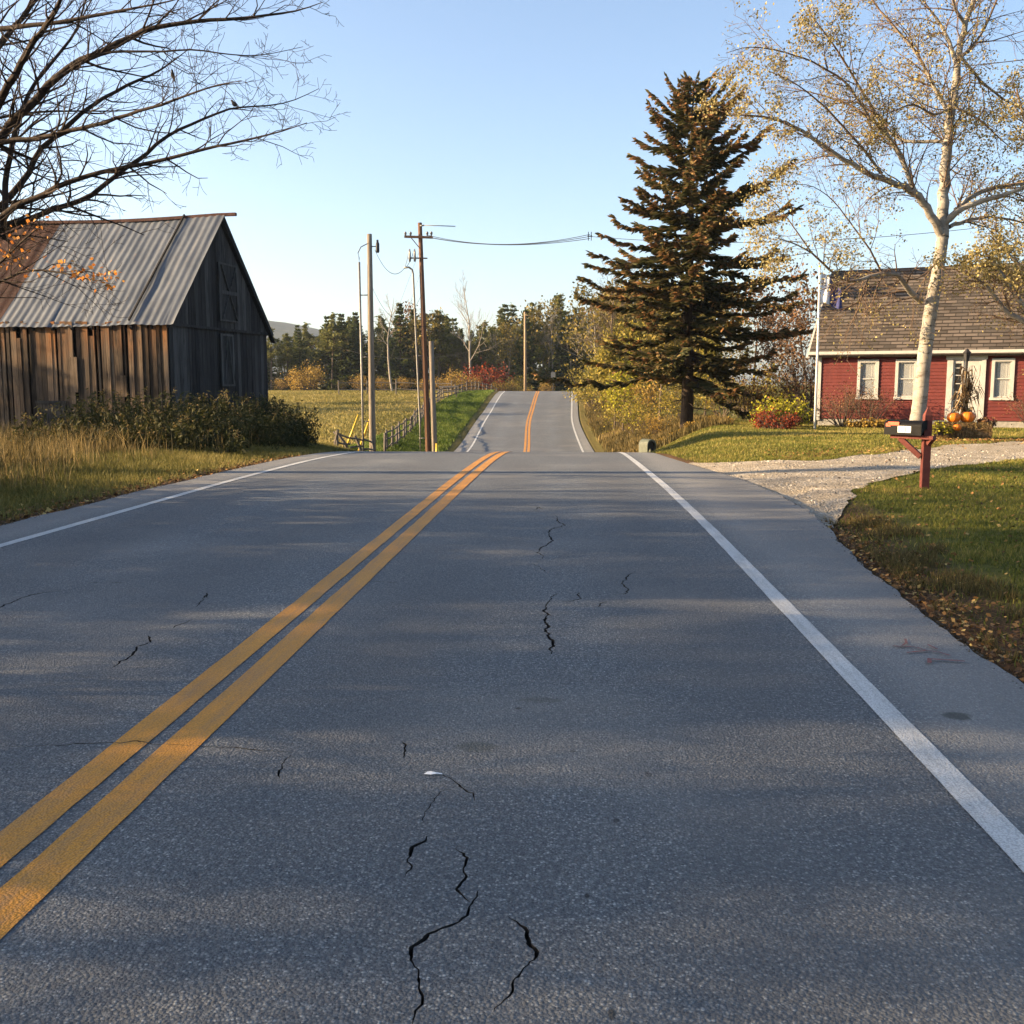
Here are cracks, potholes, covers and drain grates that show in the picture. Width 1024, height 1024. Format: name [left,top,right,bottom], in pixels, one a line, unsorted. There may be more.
crack [16,742,292,778]
crack [405,774,539,1024]
crack [534,507,565,571]
crack [542,593,581,654]
crack [114,593,208,667]
